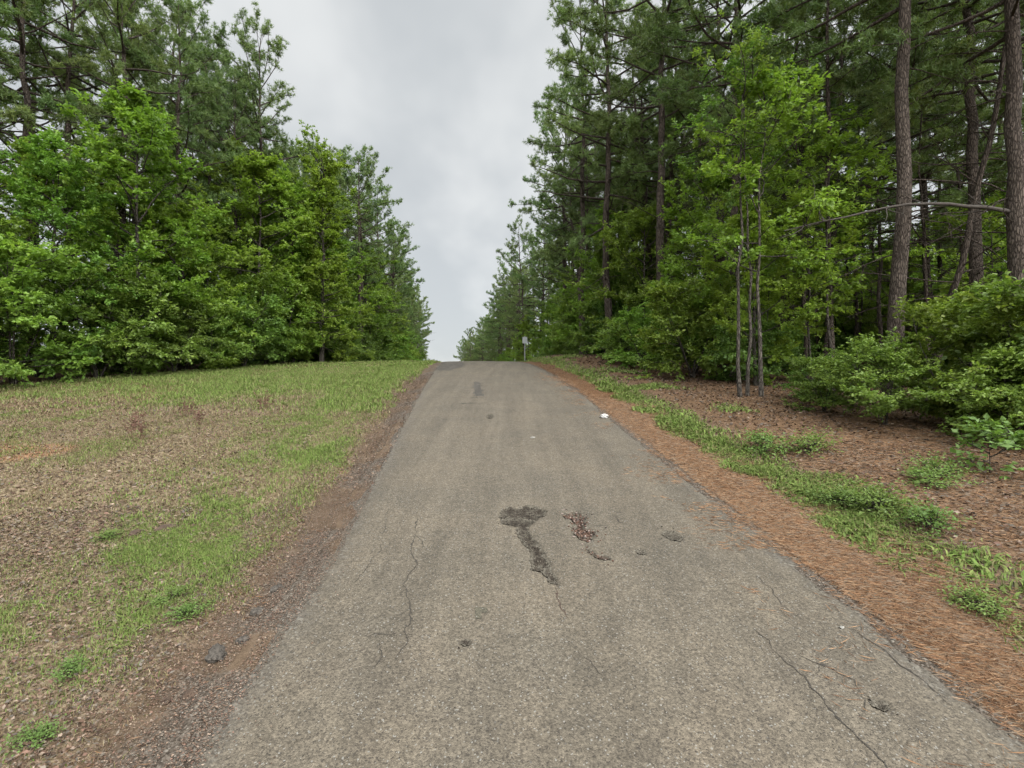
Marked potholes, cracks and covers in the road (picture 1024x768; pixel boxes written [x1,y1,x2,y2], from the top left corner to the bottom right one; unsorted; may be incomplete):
pothole [561,509,607,545]
pothole [661,526,684,541]
crack [369,517,423,666]
pothole [868,696,899,715]
crack [758,632,888,768]
pothole [582,546,615,565]
